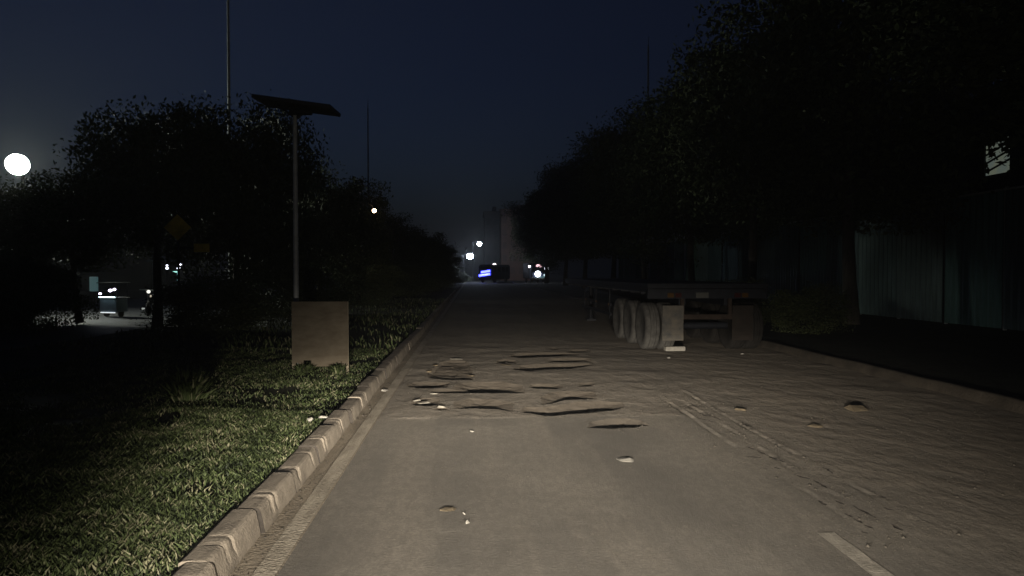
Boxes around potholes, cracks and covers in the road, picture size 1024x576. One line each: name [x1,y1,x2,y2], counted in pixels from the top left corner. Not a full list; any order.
pothole [427,360,474,380]
pothole [427,381,525,394]
pothole [540,391,598,405]
pothole [520,401,625,416]
pothole [453,398,514,411]
pothole [587,418,649,429]
pothole [514,363,593,371]
